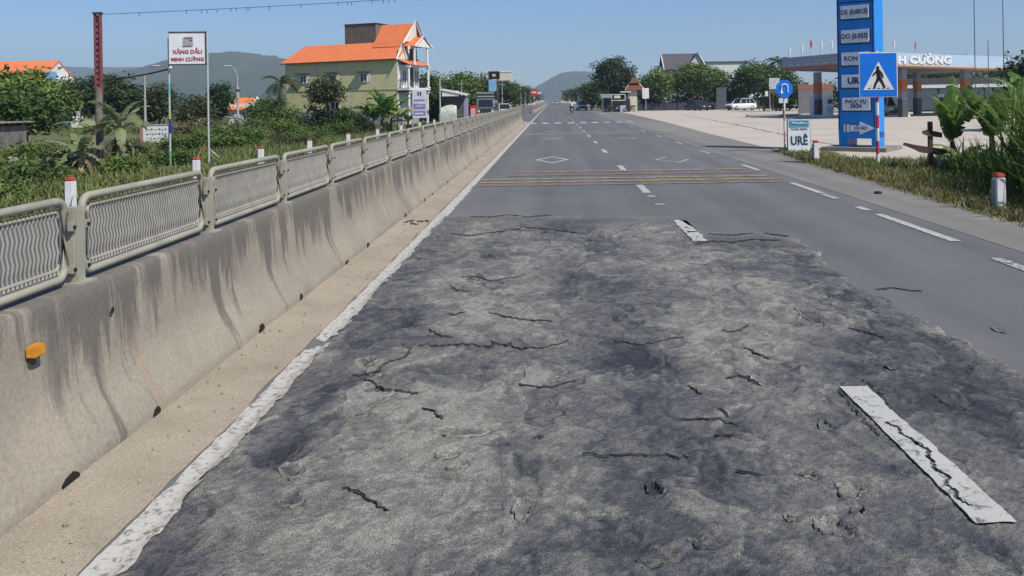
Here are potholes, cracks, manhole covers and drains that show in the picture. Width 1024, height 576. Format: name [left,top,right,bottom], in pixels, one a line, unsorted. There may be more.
pothole [812,514,855,538]
crack [614,337,683,345]
crack [722,324,769,385]
crack [451,214,576,236]
pothole [835,480,868,499]
crack [450,276,520,292]
crack [352,311,569,418]
crack [695,233,789,244]
crack [342,487,391,510]
pothole [645,480,667,498]
crack [687,385,734,437]
